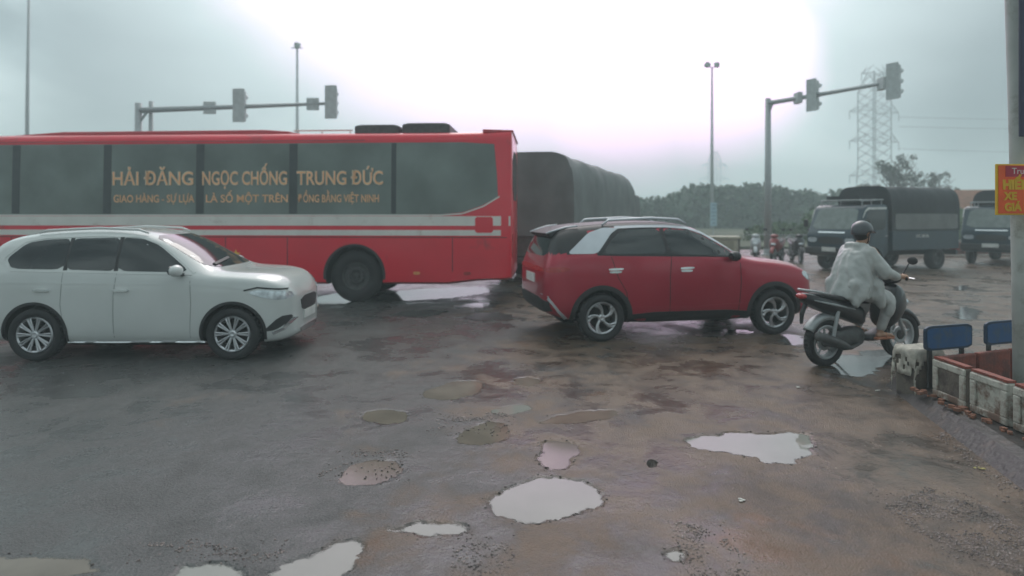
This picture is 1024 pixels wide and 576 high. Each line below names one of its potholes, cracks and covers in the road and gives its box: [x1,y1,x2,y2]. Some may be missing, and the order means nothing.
pothole [534,438,584,471]
pothole [682,430,819,466]
pothole [261,537,368,576]
pothole [168,559,251,576]
pothole [452,420,515,446]
pothole [535,409,622,425]
pothole [509,376,544,387]
pothole [382,519,473,540]
pothole [482,474,610,526]
pothole [0,552,108,576]
pothole [358,408,412,425]
pothole [419,379,488,401]
